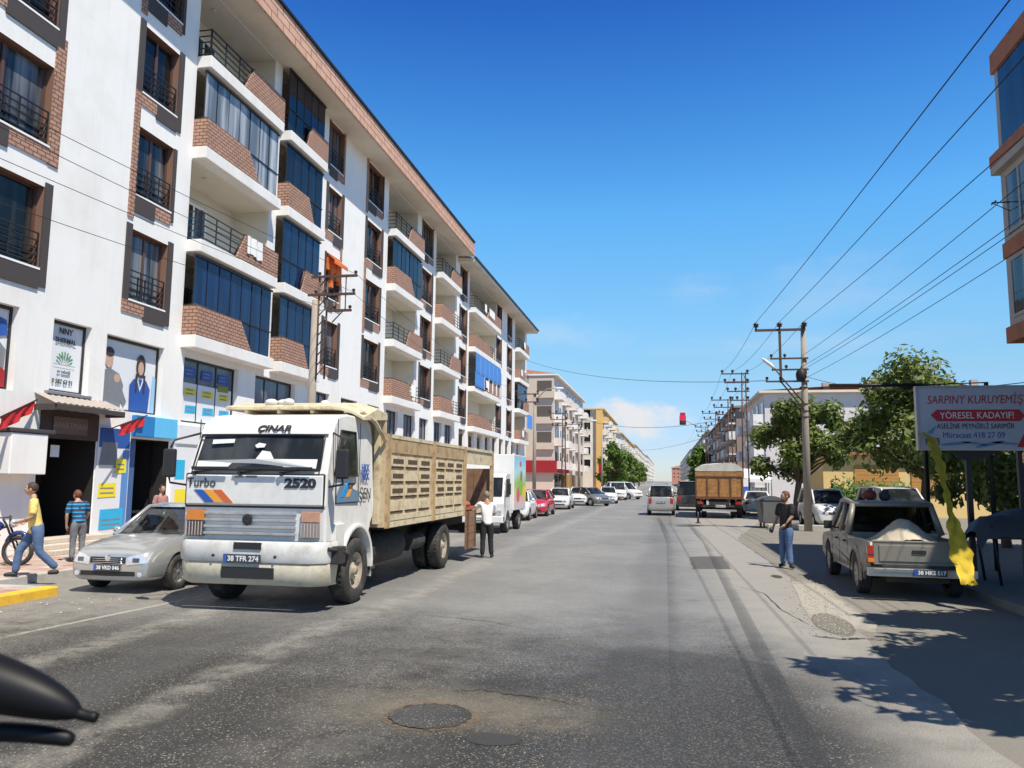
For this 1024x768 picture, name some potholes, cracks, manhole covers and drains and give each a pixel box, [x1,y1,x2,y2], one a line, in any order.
crack [738,586,887,640]
manhole cover [371,701,491,735]
